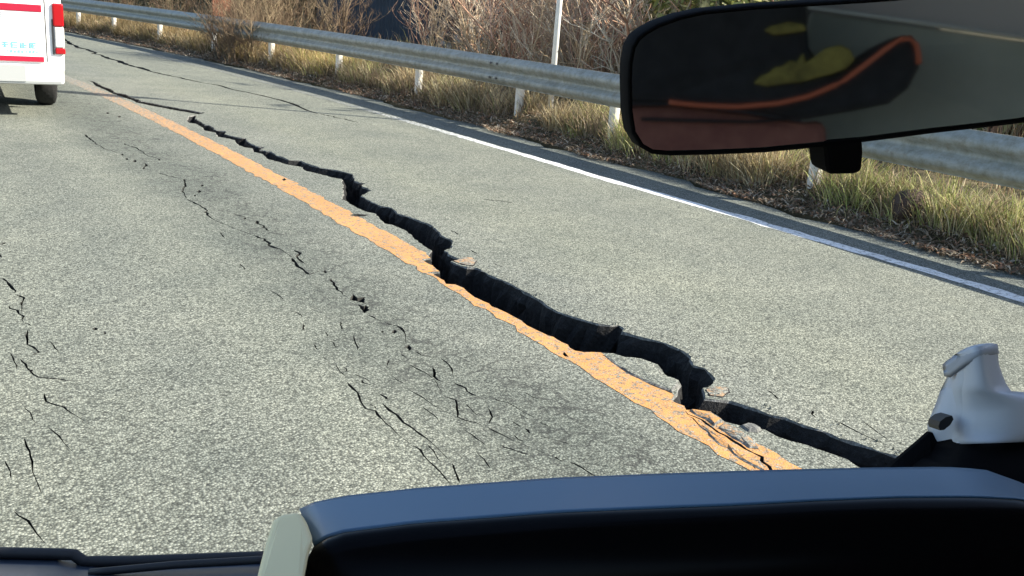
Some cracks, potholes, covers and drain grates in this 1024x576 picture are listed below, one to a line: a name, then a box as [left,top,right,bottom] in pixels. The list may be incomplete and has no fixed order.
crack [3,278,90,492]
crack [64,38,898,483]
crack [13,510,45,543]
